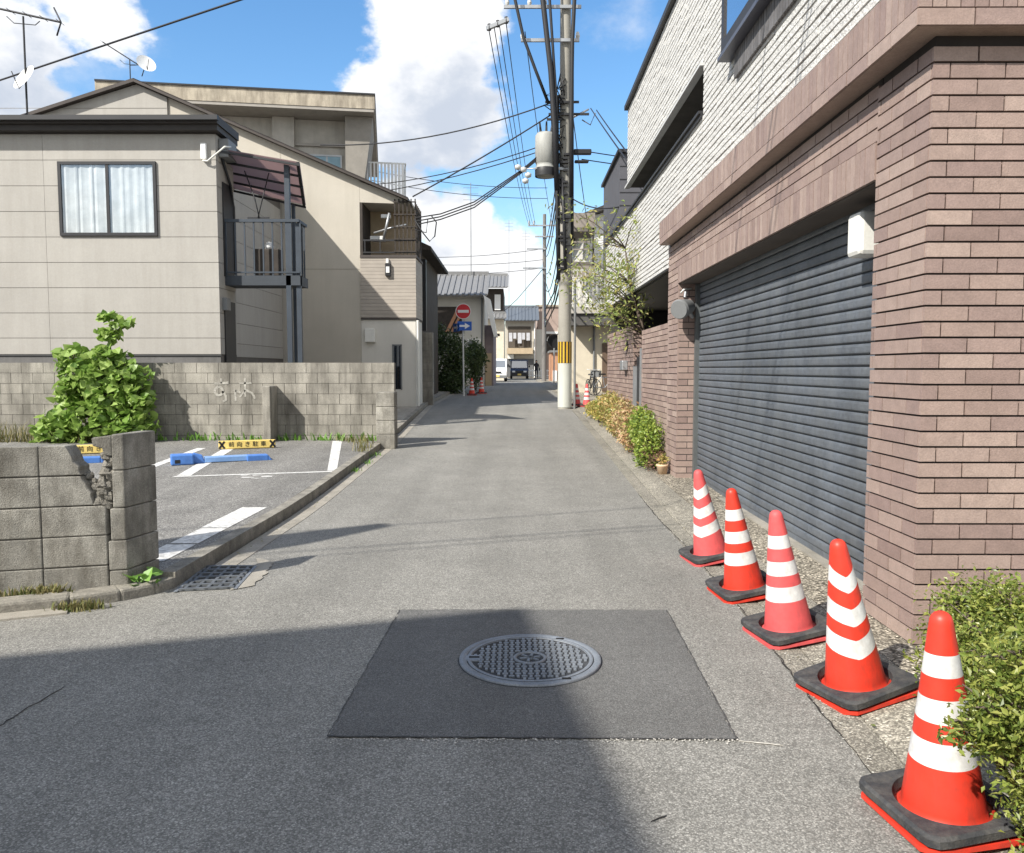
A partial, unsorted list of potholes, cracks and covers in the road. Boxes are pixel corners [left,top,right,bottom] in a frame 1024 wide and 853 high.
drain grate [173,565,257,592]
crack [0,687,63,726]
manhole cover [458,634,602,688]
